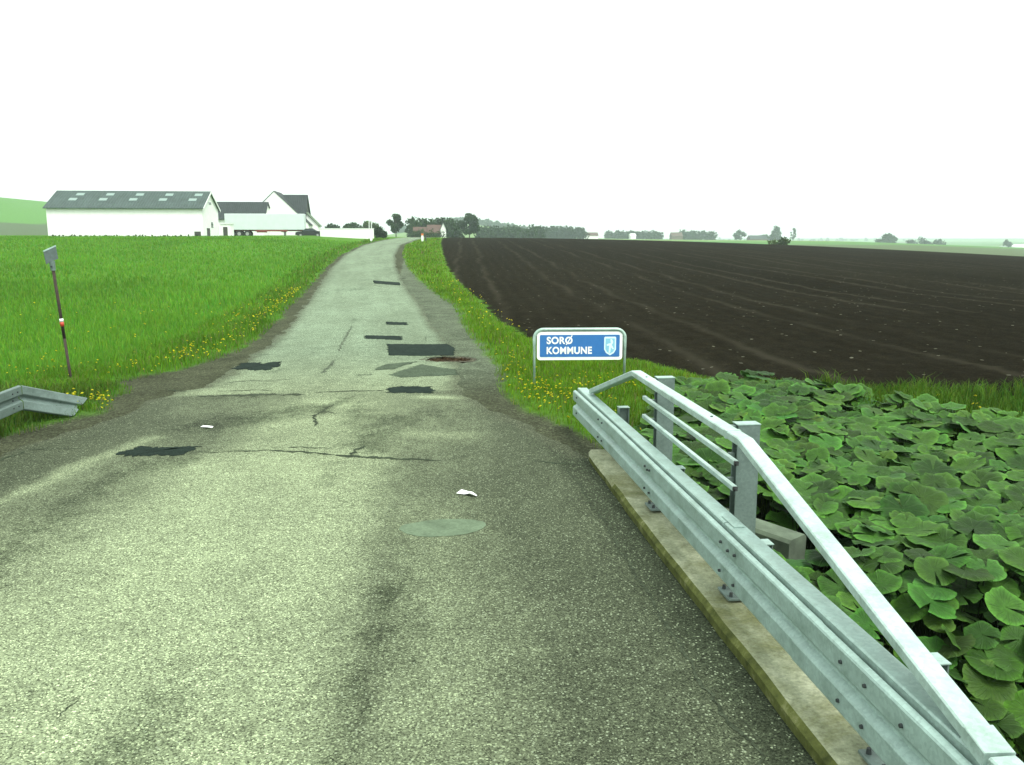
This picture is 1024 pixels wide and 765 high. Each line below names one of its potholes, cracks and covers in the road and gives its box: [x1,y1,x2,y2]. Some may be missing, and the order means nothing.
crack [200,378,383,426]
crack [321,326,352,373]
